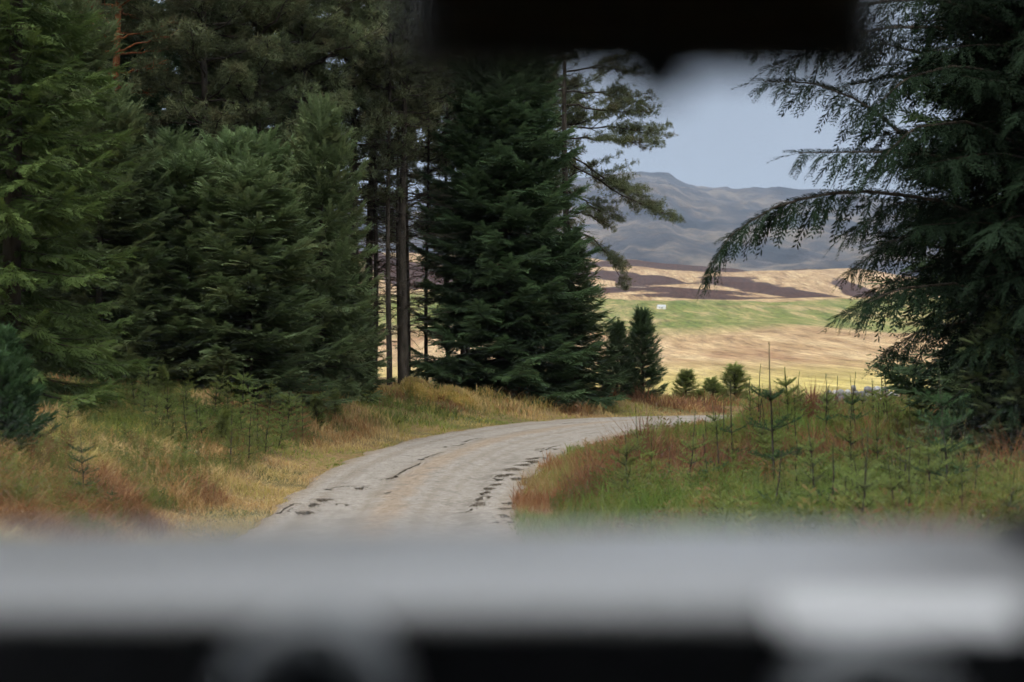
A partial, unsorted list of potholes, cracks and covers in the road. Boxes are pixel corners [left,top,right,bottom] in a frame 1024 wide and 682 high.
crack [385,438,484,494]
